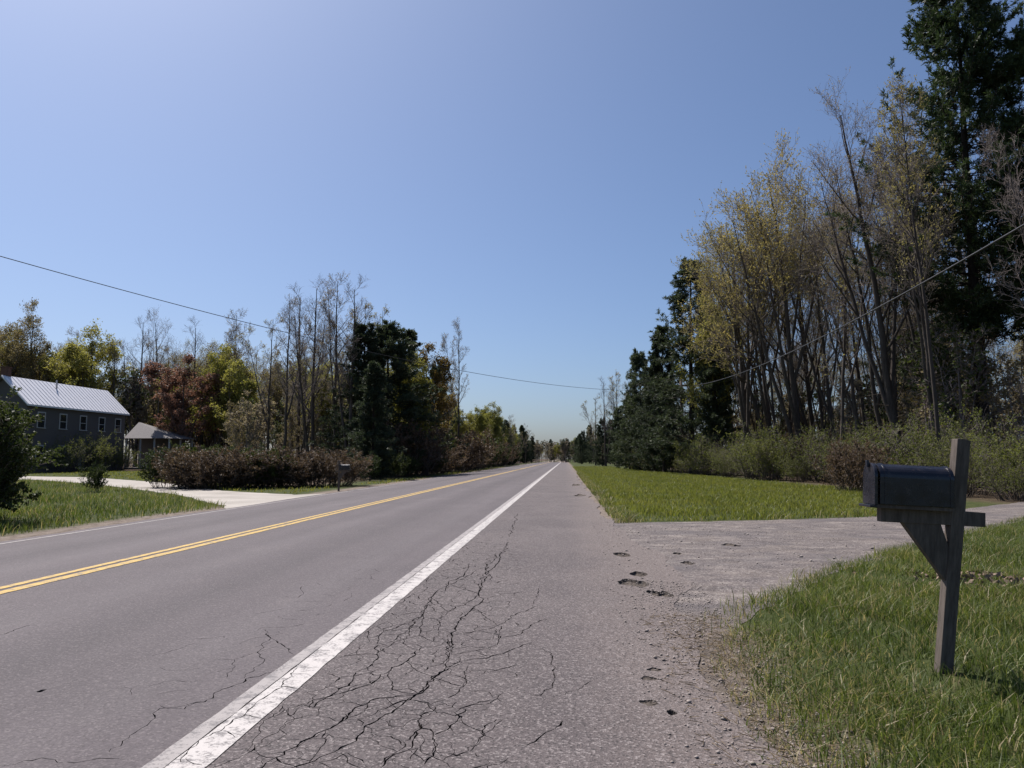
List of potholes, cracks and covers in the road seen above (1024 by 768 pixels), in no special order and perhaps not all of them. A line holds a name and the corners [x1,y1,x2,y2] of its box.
crack [215,525,555,768]
pothole [618,579,649,587]
crack [28,584,320,763]
